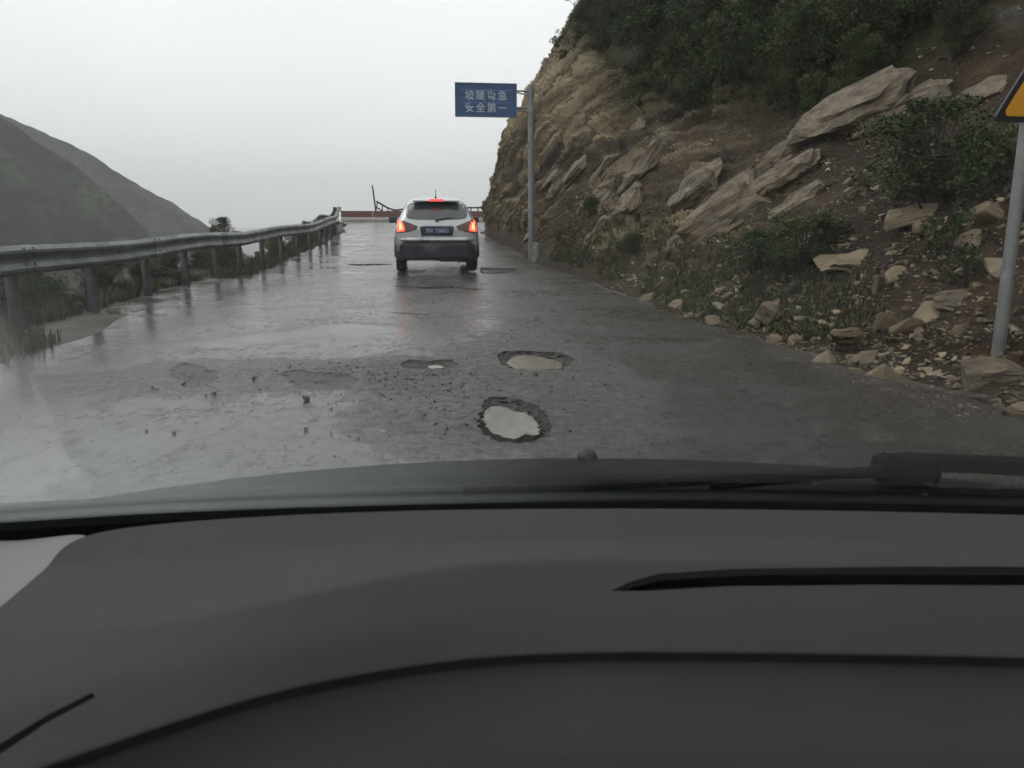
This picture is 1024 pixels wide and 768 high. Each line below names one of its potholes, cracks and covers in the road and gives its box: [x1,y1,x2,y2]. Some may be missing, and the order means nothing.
pothole [282,369,360,391]
pothole [169,363,220,389]
pothole [476,396,553,443]
pothole [401,360,459,369]
pothole [497,350,575,370]
